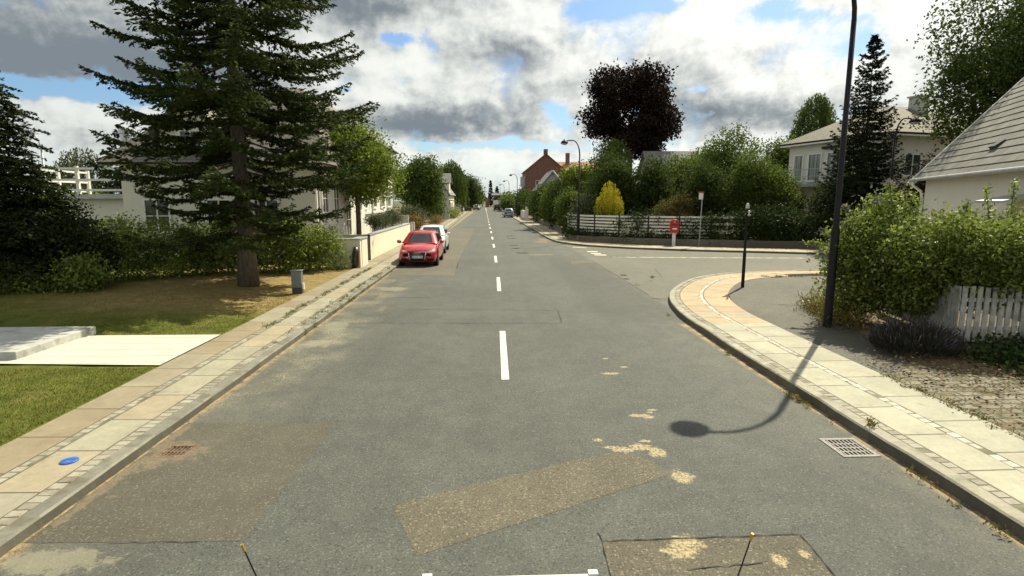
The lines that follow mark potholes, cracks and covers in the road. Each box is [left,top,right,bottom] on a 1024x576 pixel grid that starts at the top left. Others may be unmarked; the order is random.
drain grate [155,444,200,457]
crack [598,533,835,576]
drain grate [818,438,881,458]
